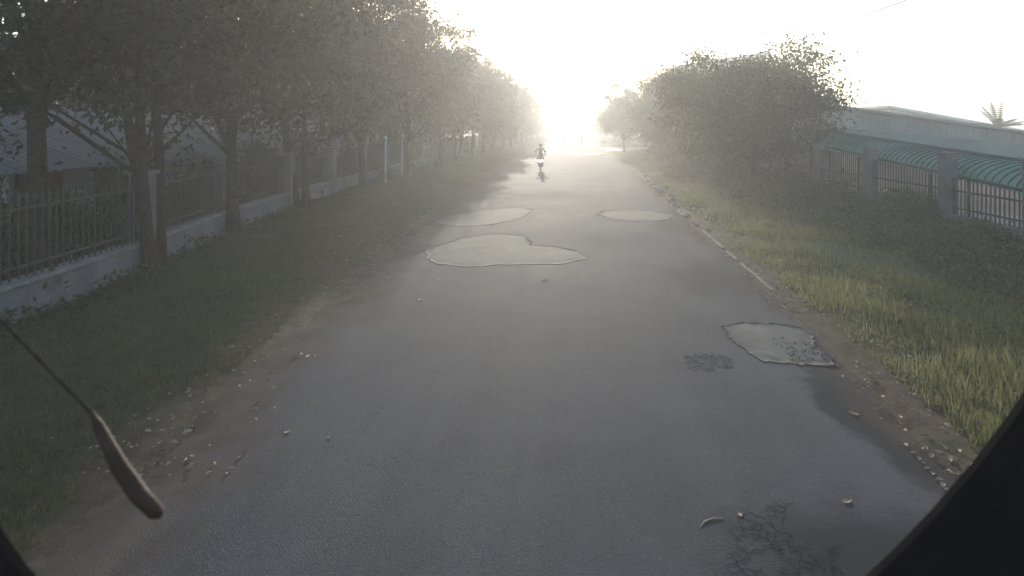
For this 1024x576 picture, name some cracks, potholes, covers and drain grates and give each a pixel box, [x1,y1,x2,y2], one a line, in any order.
crack [724,501,855,576]
